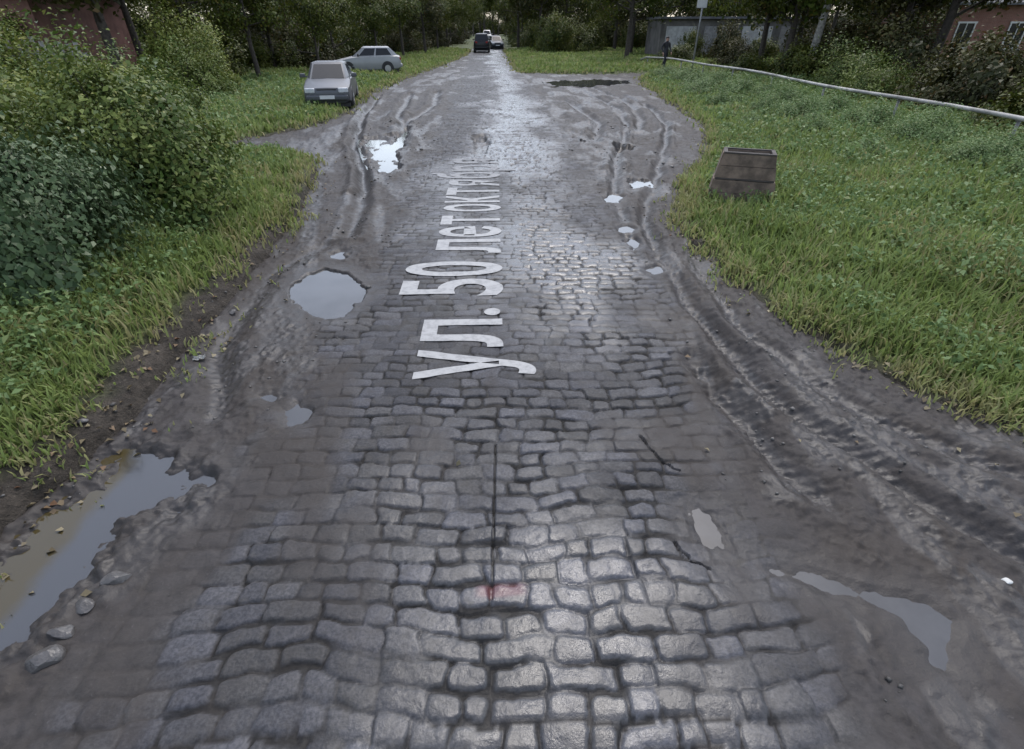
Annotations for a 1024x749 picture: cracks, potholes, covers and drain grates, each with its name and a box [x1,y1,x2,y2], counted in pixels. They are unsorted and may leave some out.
pothole [355,125,414,175]
crack [488,443,498,601]
pothole [285,267,369,320]
crack [672,540,713,571]
crack [637,434,682,472]
